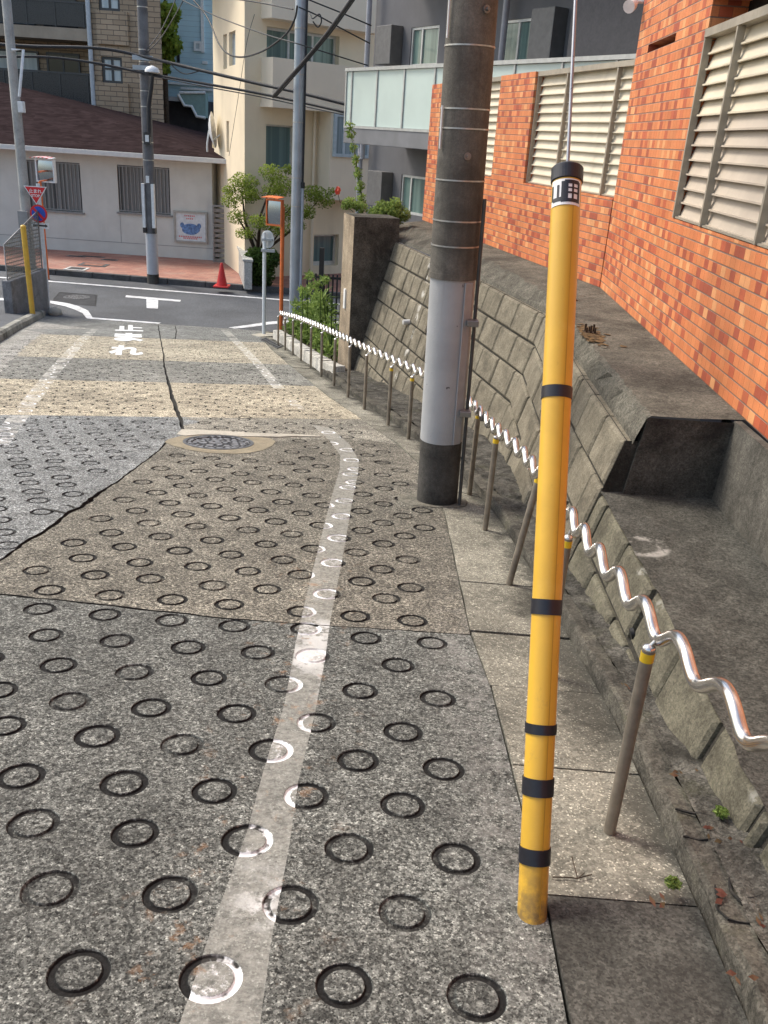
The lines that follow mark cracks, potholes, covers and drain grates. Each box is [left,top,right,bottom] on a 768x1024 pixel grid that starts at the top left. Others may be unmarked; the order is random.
crack [0,326,184,561]
manhole cover [165,435,275,454]
